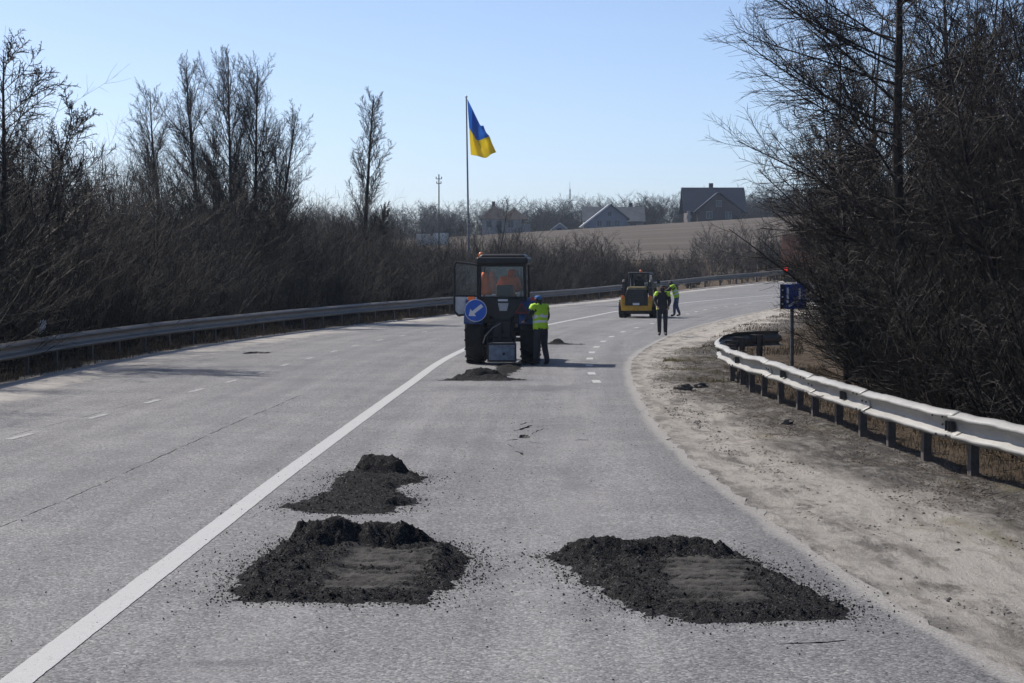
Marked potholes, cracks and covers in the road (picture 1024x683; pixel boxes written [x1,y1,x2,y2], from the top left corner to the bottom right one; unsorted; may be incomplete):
crack [508,422,547,455]
